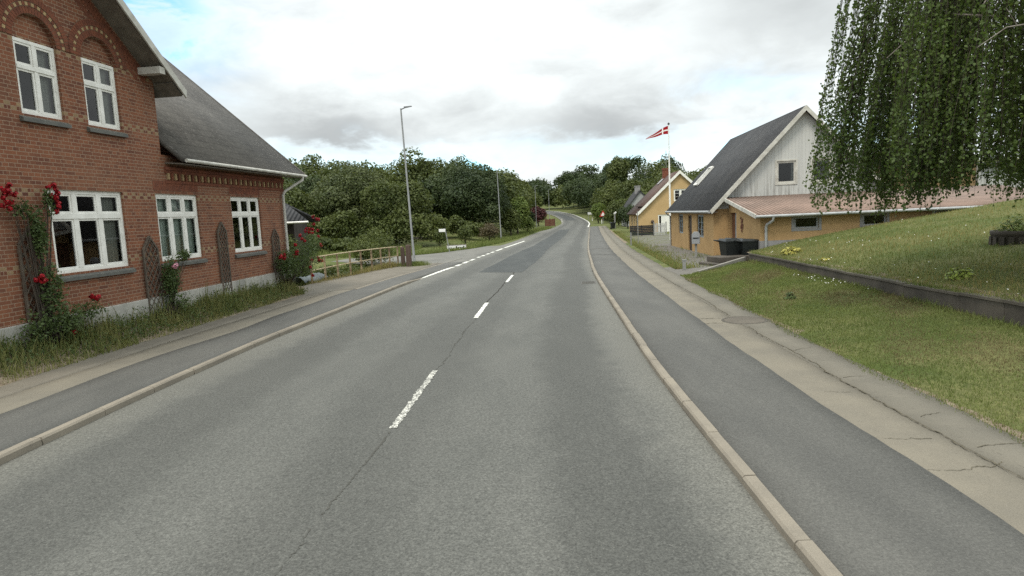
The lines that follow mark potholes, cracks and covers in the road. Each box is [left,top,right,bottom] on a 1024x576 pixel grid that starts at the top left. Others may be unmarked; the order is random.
manhole cover [721,316,768,324]
